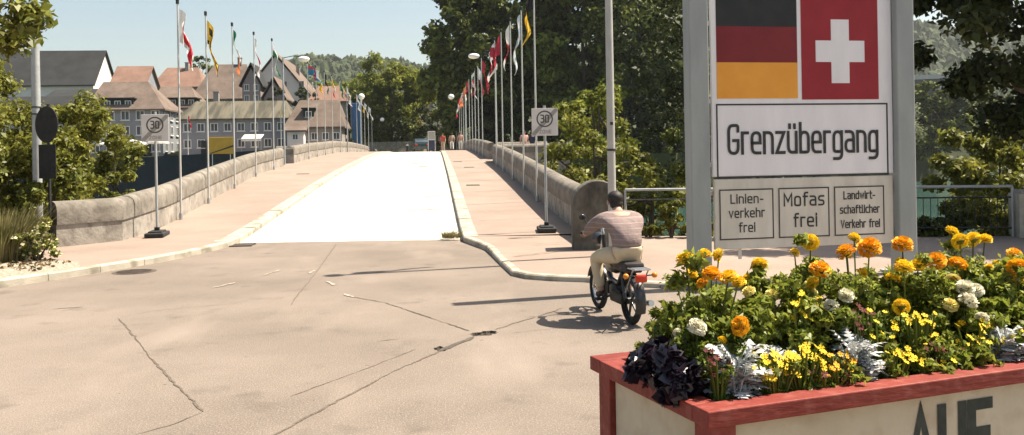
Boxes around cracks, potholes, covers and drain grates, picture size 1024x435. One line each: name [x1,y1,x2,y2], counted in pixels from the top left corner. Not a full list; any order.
crack [273,297,565,435]
crack [118,300,248,433]
